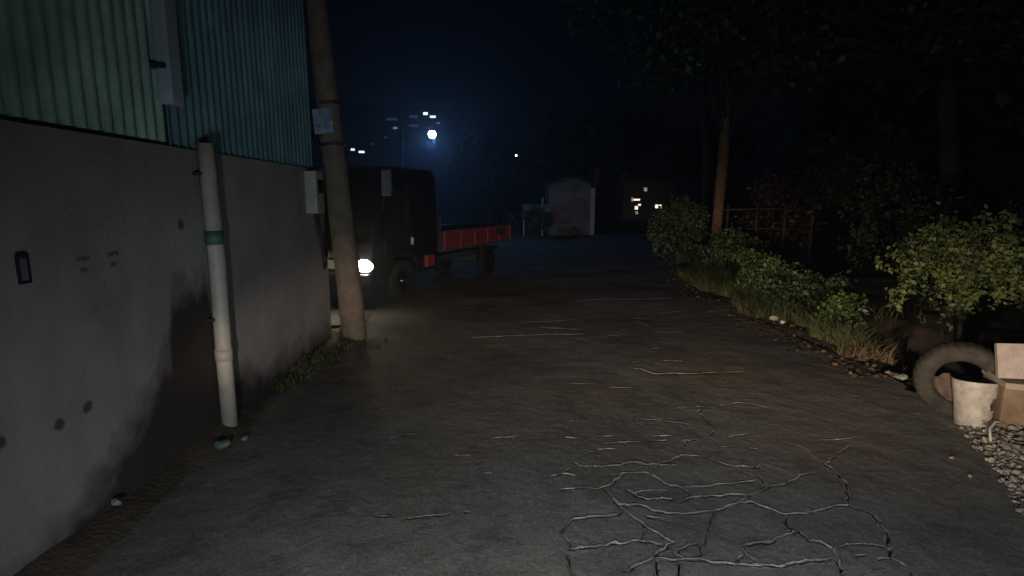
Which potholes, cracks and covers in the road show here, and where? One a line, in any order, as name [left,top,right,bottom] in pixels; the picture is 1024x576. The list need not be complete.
crack [570,311,744,389]
crack [468,319,616,339]
crack [376,510,470,519]
crack [544,402,913,576]
